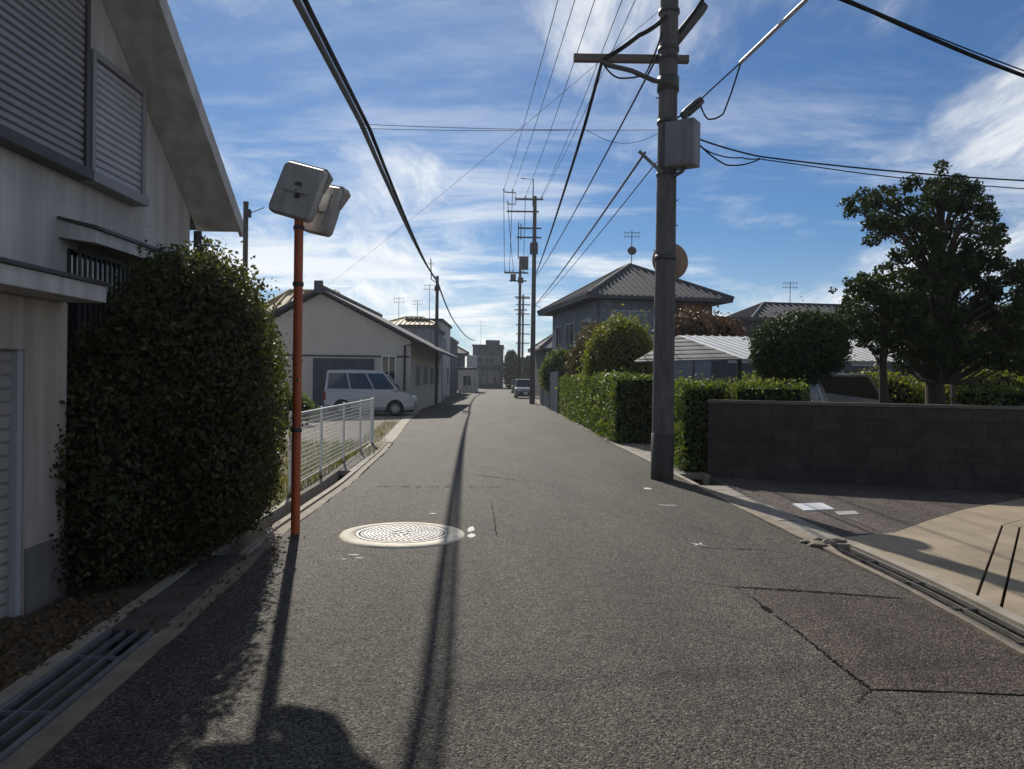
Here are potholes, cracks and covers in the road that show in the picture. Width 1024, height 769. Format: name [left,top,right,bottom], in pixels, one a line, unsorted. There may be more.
crack [691,581,1024,715]
crack [381,474,519,534]
manhole cover [339,522,465,548]
drain grate [838,548,1024,646]
drain grate [0,629,155,763]
